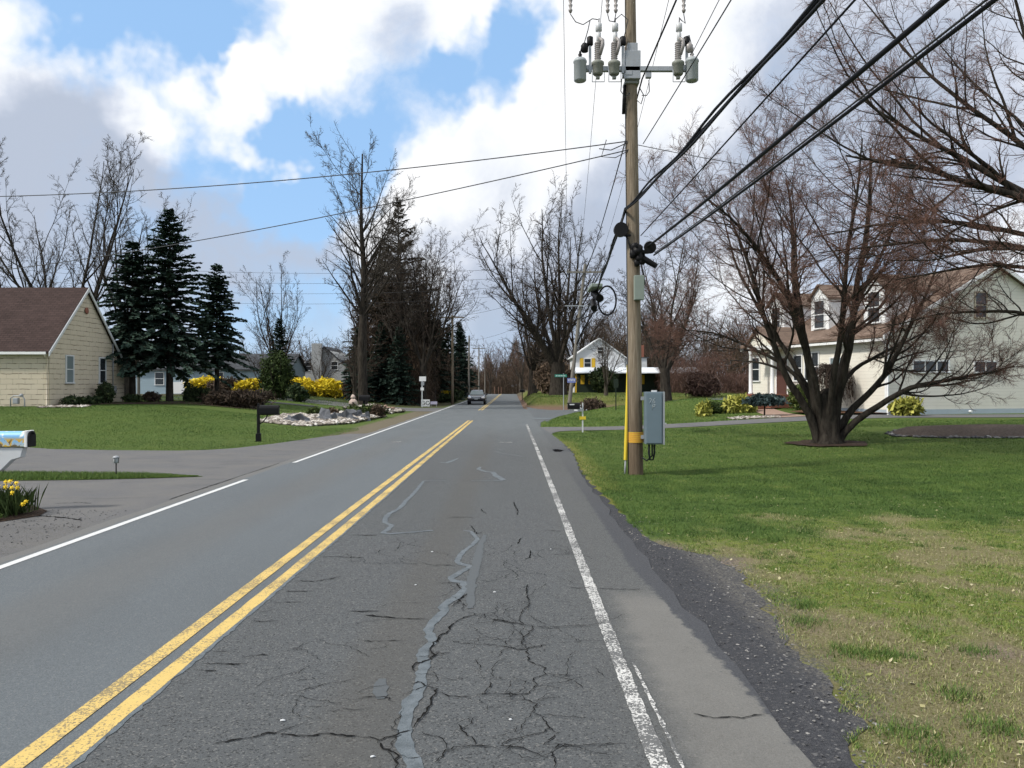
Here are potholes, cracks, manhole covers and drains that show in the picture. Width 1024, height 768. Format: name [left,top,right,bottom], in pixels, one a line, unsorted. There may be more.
crack [216,539,621,768]
